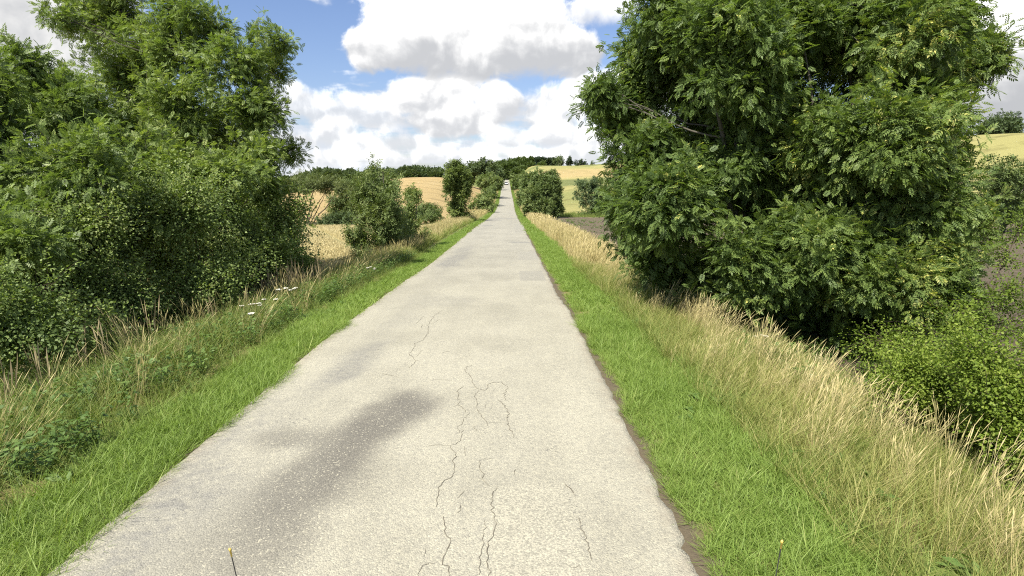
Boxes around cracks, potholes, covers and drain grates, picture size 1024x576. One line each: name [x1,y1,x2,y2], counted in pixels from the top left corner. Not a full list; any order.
crack [417,365,516,576]
crack [565,484,592,571]
